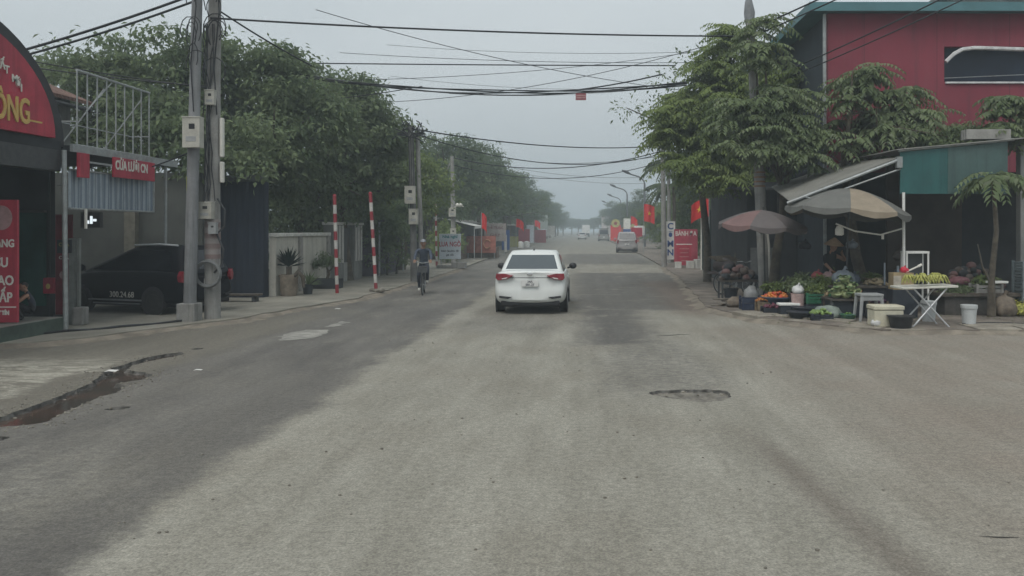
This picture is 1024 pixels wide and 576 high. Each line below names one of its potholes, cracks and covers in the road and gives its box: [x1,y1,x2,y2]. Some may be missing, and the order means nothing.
pothole [0,352,184,422]
pothole [649,389,731,402]
